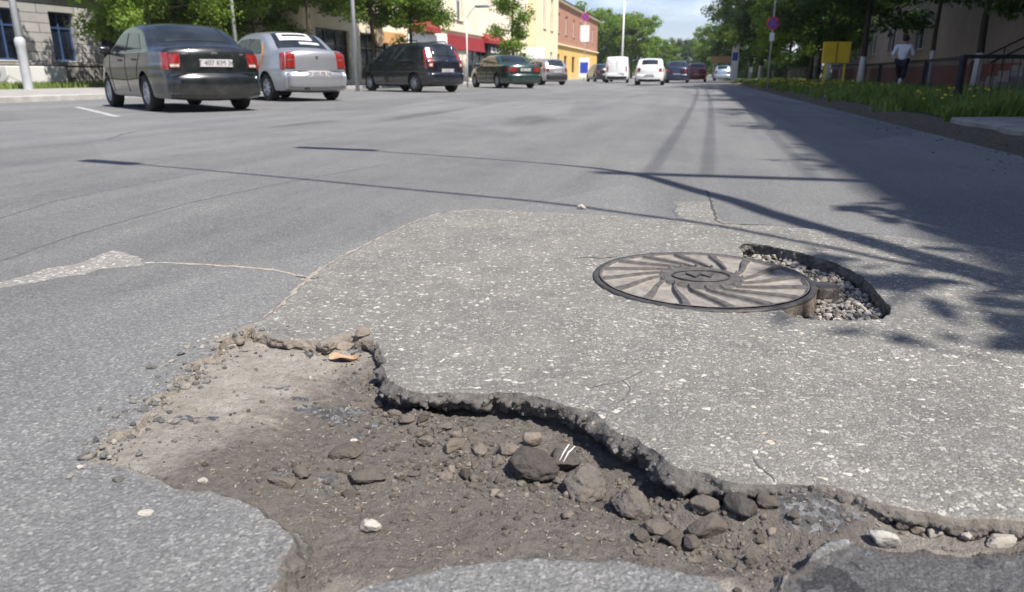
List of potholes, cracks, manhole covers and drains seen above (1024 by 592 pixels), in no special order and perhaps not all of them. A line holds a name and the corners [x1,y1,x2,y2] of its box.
pothole [90,327,1024,592]
manhole cover [593,252,840,319]
crack [154,262,318,279]
crack [705,190,871,234]
crack [589,367,646,403]
